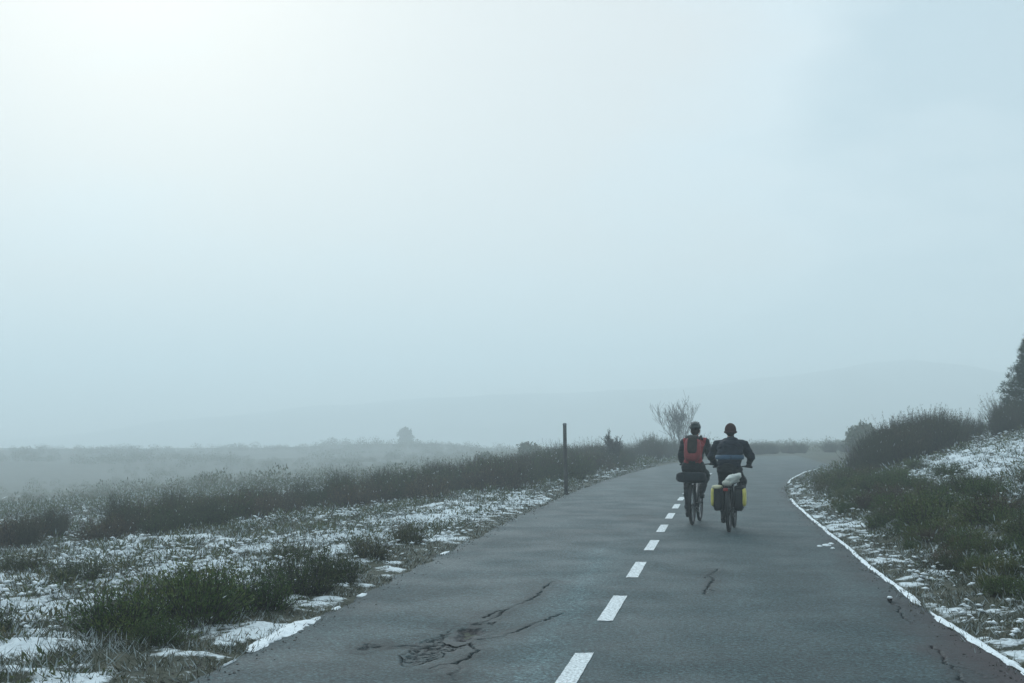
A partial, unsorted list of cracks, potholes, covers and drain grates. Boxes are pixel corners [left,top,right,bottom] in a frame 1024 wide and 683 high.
crack [696,568,724,595]
crack [389,581,572,683]
crack [881,596,921,625]
crack [920,644,997,683]
